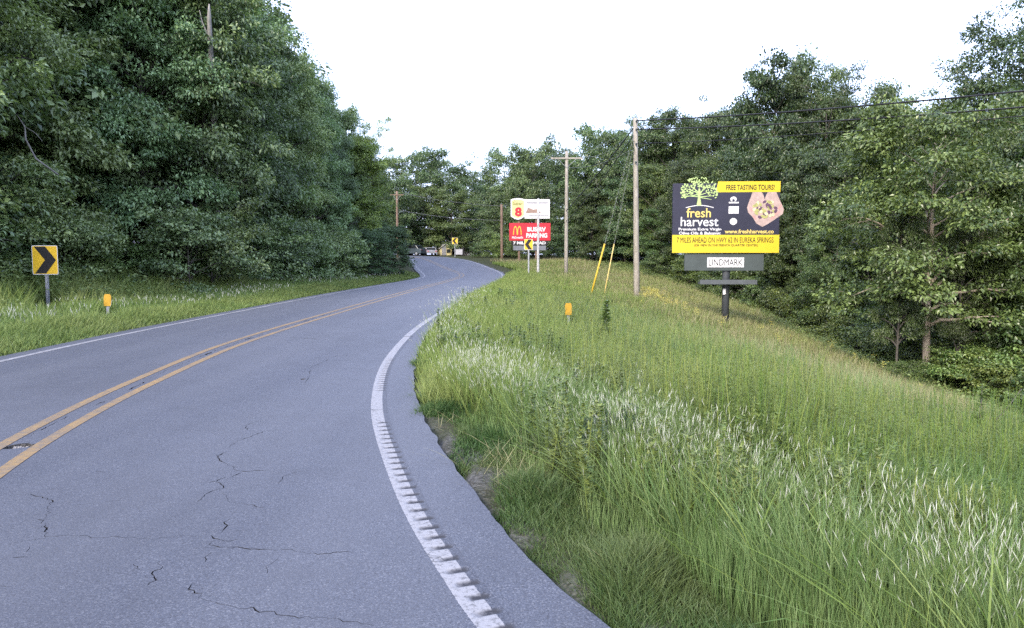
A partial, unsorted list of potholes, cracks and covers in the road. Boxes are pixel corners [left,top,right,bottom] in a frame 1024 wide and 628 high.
crack [187,585,370,625]
crack [15,494,182,558]
crack [195,423,347,572]
